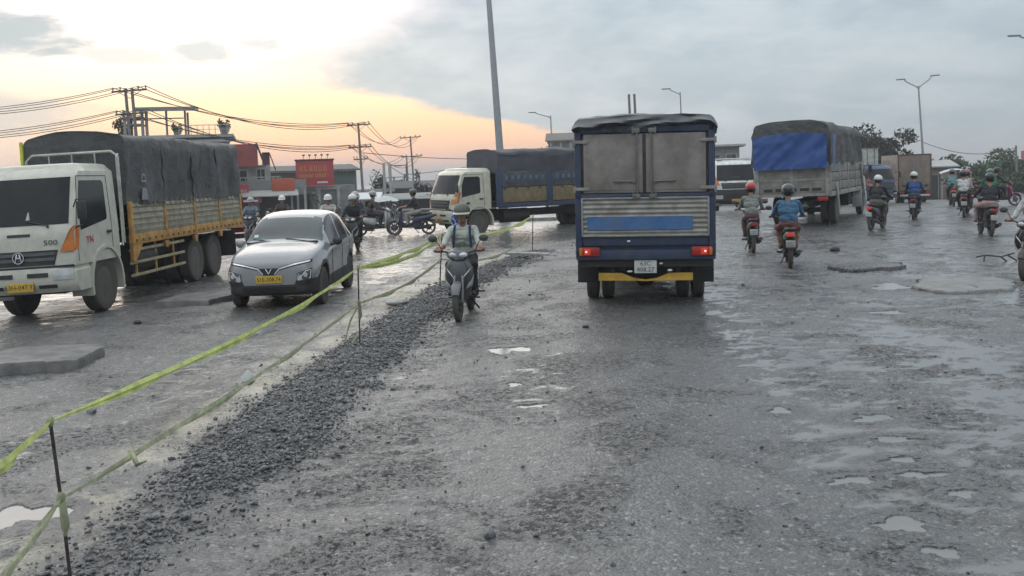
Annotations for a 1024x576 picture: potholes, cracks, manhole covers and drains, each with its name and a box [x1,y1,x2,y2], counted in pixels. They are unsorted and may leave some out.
pothole [834,411,915,425]
pothole [813,472,891,490]
pothole [900,543,982,562]
pothole [504,402,560,411]
pothole [476,344,541,356]
pothole [879,468,967,483]
pothole [850,434,944,446]
pothole [0,497,96,539]
